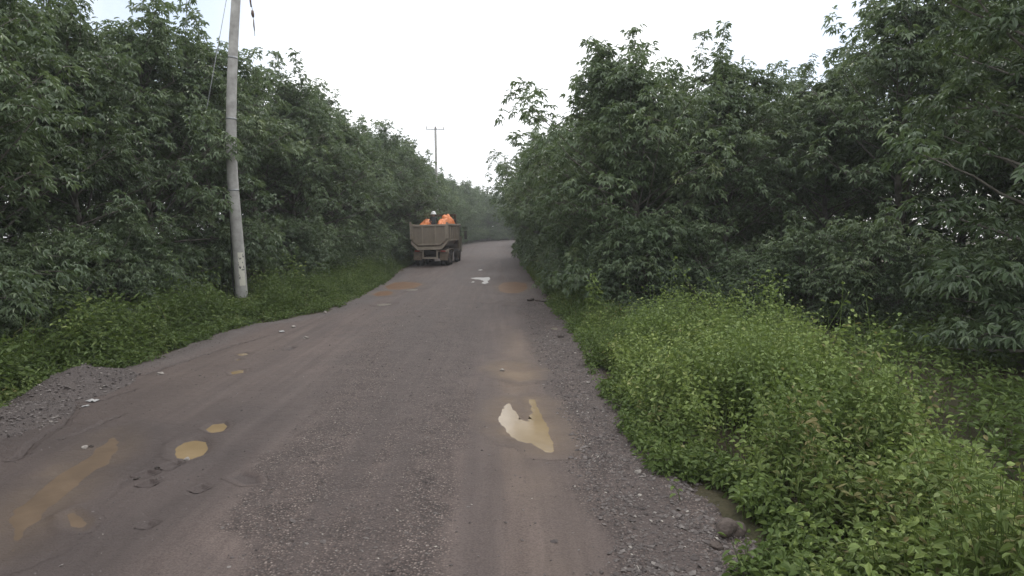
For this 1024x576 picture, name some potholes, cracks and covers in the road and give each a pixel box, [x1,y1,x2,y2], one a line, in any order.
pothole [479,359,550,385]
pothole [158,434,223,465]
pothole [0,419,165,576]
pothole [197,419,236,434]
pothole [187,484,213,493]
pothole [476,393,582,460]
